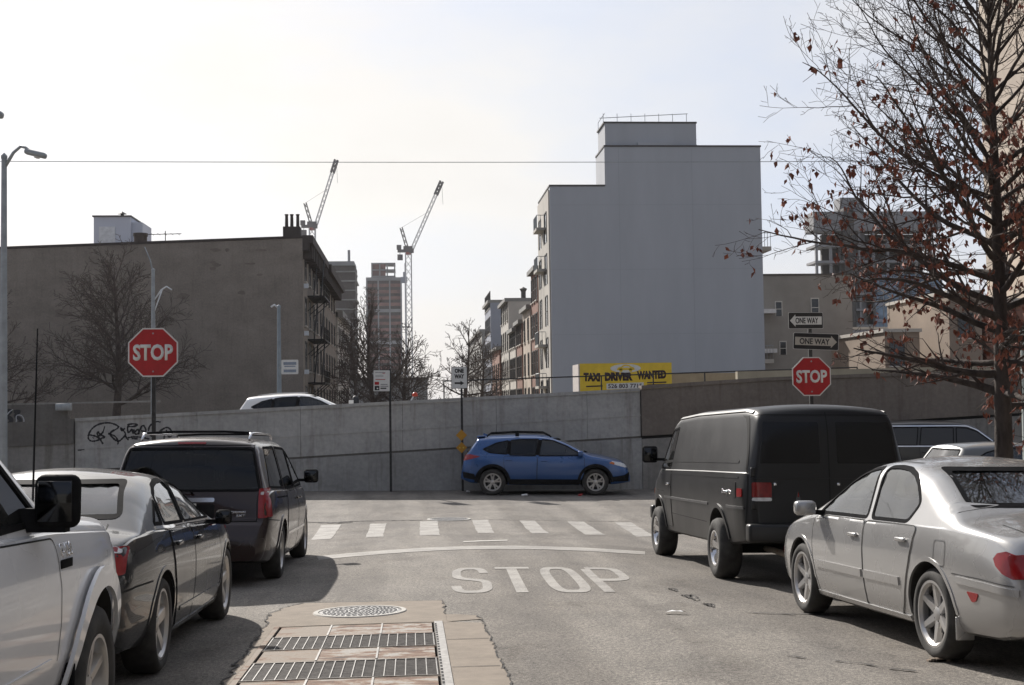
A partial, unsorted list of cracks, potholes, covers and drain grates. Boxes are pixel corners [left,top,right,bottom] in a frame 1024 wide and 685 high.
crack [442,600,513,685]
manhole cover [313,605,407,618]
drain grate [229,621,454,685]
